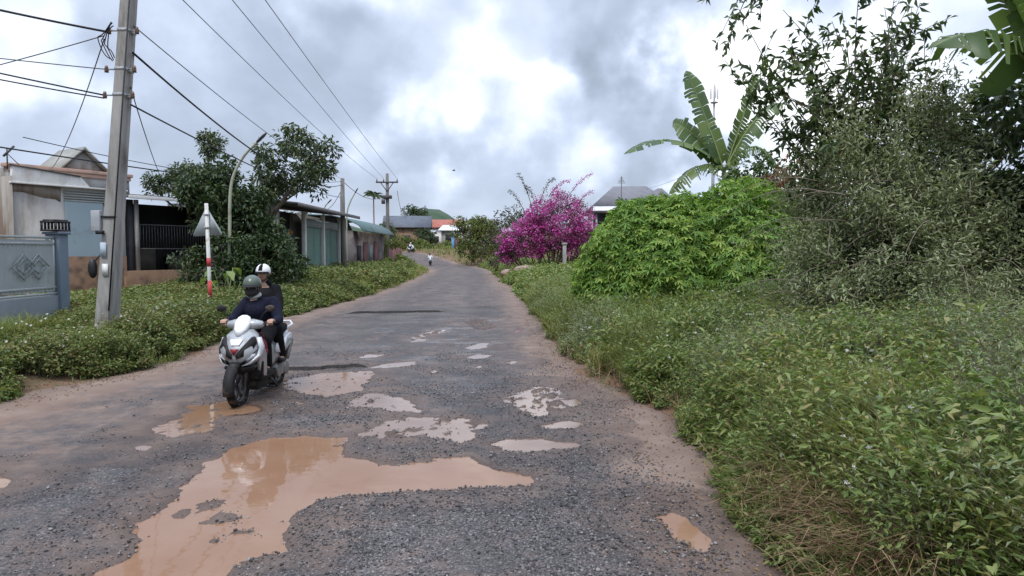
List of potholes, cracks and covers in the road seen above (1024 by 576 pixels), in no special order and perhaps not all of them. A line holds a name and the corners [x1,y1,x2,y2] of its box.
pothole [497,382,572,418]
pothole [340,391,428,414]
pothole [76,433,543,576]
pothole [486,435,589,454]
pothole [271,369,381,398]
pothole [333,413,501,447]
pothole [0,472,22,489]
pothole [364,359,423,368]
pothole [401,328,451,343]
pothole [138,399,268,440]
pothole [463,342,492,350]
